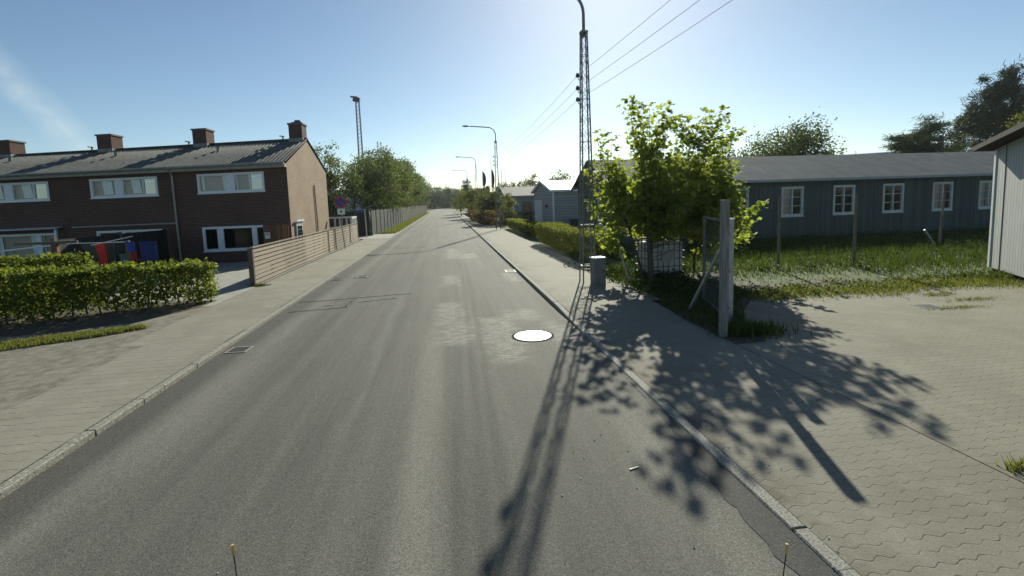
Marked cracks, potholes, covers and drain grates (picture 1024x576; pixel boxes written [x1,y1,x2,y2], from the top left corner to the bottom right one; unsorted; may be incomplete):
manhole cover [511,330,554,342]
drain grate [224,346,254,354]
crack [289,293,411,313]
